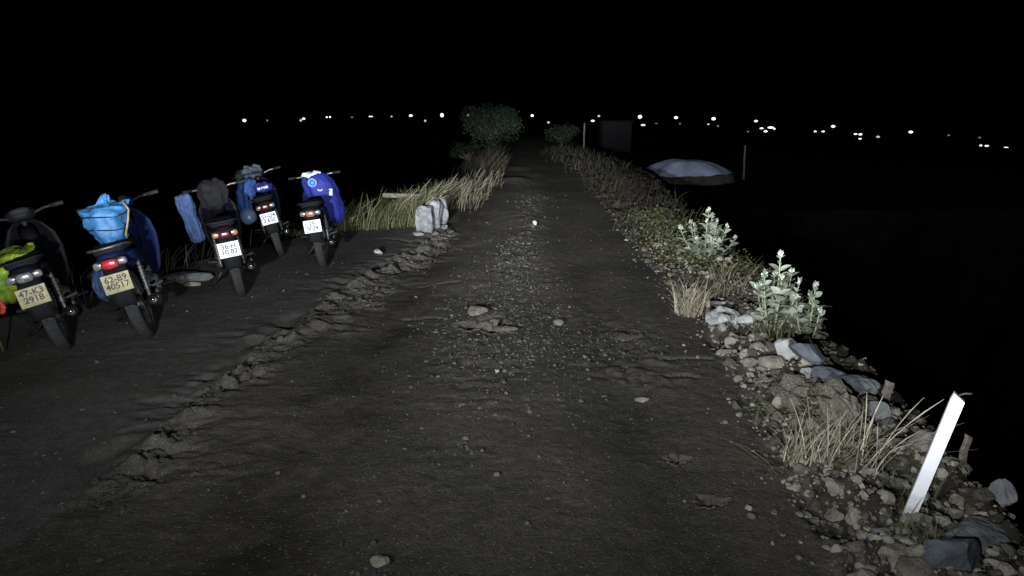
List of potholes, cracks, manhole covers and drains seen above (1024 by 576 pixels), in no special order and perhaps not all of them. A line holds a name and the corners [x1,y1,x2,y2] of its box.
pothole [448,315,515,335]
